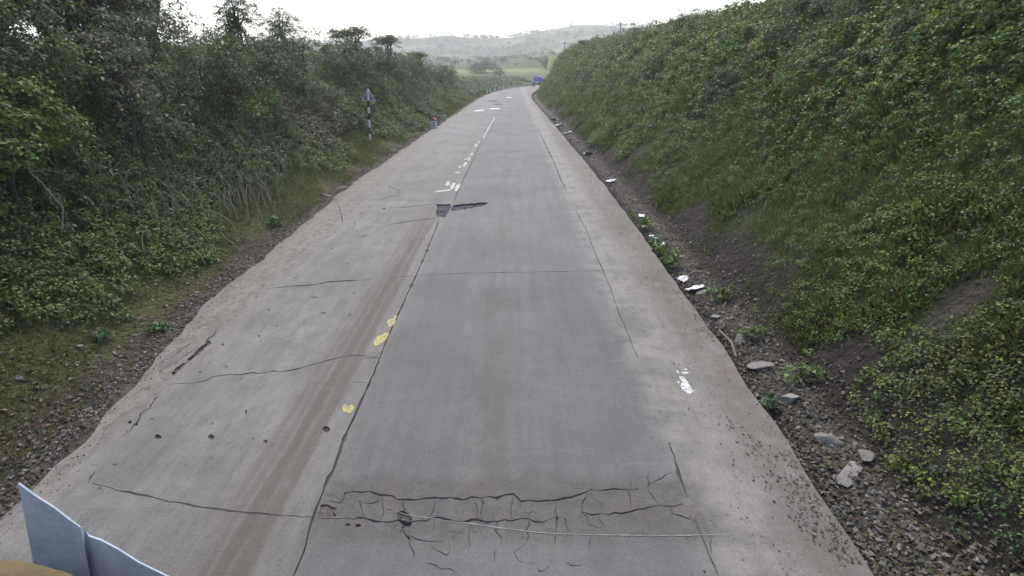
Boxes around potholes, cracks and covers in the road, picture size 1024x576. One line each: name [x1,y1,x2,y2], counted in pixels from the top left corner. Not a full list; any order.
crack [354,186,435,237]
pothole [436,204,451,217]
crack [319,473,691,572]
crack [167,325,377,384]
crack [268,280,355,289]
pothole [451,202,488,211]
